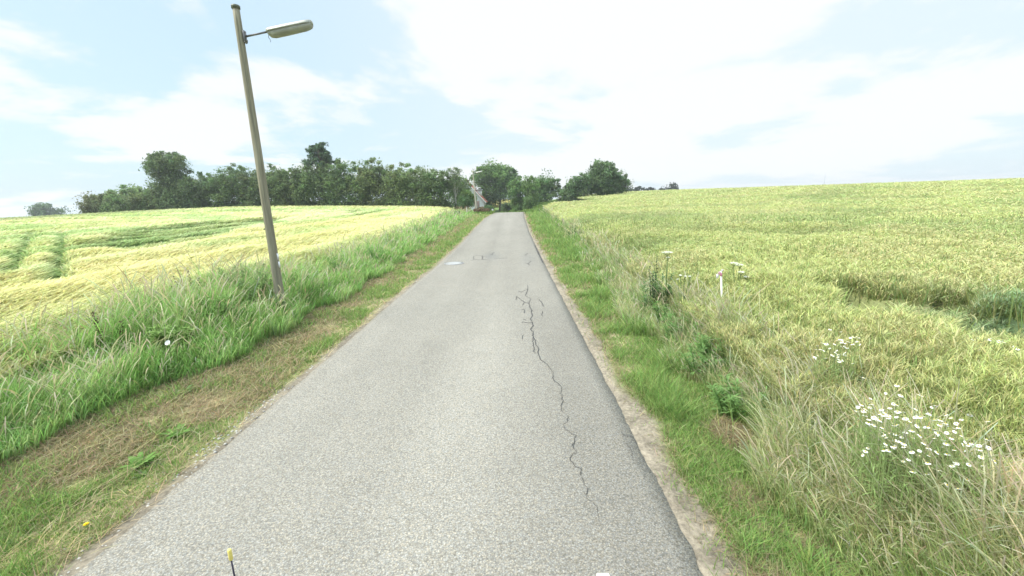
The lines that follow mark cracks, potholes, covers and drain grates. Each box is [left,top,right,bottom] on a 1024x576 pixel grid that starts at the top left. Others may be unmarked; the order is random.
crack [516,286,599,517]
